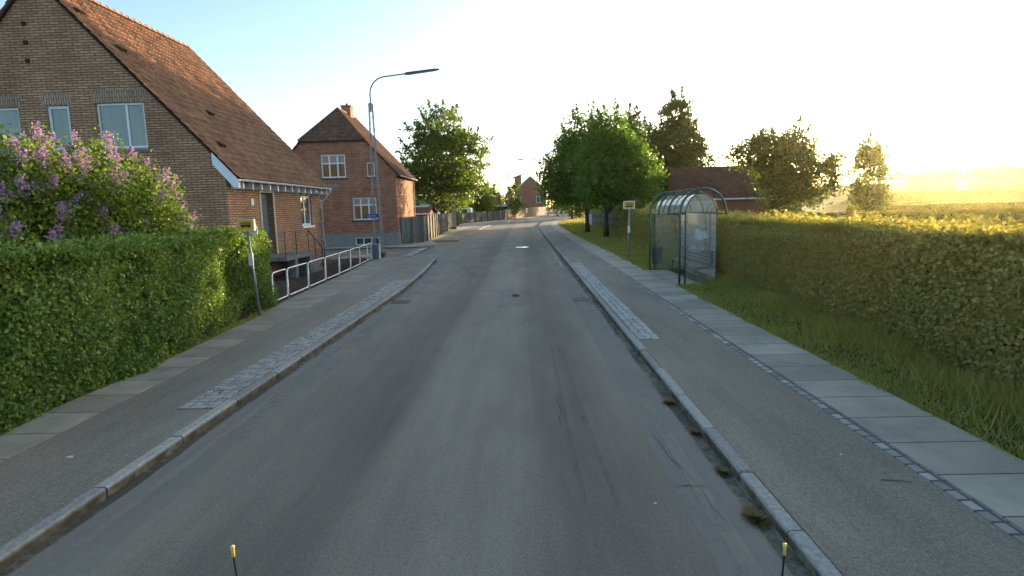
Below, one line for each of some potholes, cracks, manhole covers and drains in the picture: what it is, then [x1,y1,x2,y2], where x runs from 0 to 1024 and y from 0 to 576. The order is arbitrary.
crack [653,435,725,520]
